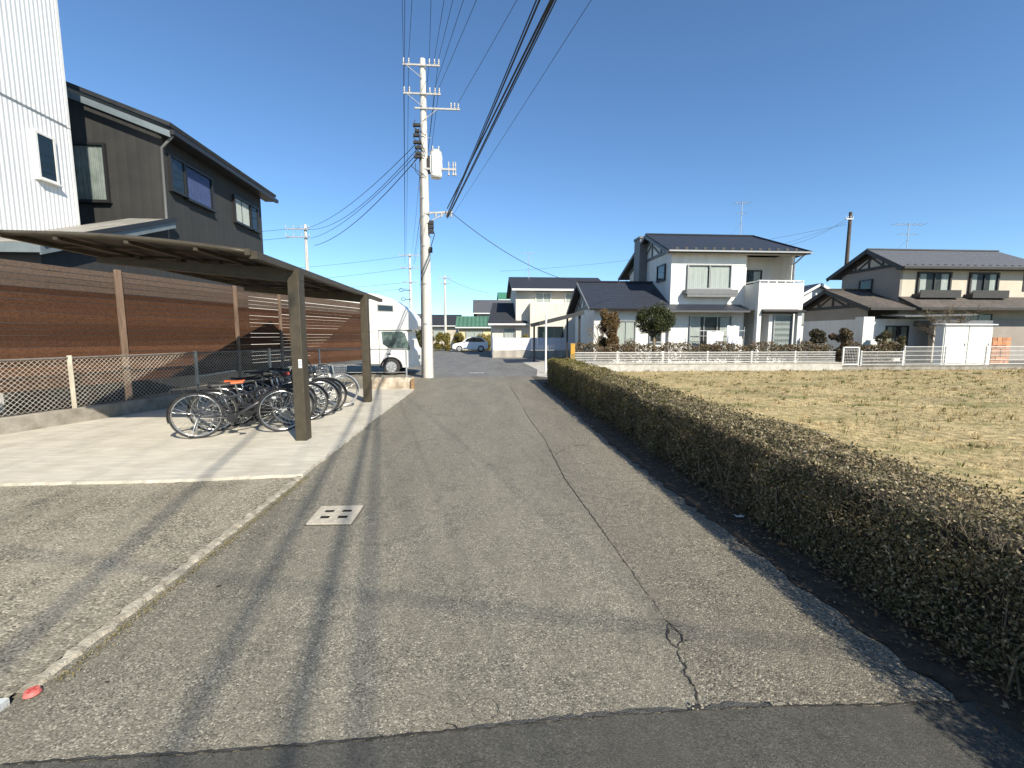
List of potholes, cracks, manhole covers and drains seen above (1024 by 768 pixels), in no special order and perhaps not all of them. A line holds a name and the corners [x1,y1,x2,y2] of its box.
crack [2,407,972,766]
